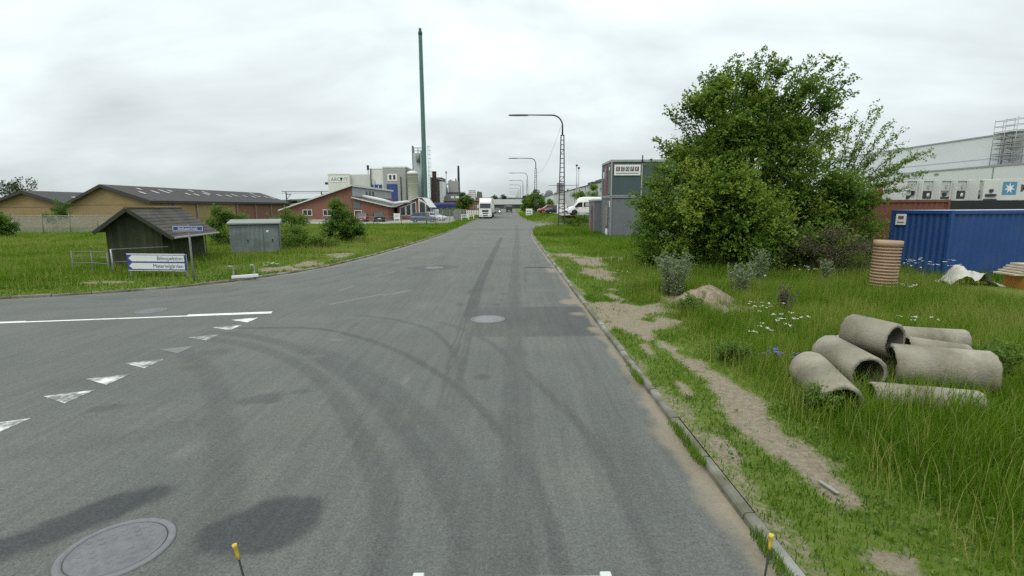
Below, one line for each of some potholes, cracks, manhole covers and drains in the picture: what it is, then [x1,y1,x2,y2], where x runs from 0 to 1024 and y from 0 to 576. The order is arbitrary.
manhole cover [51,518,177,576]
manhole cover [471,315,505,323]
